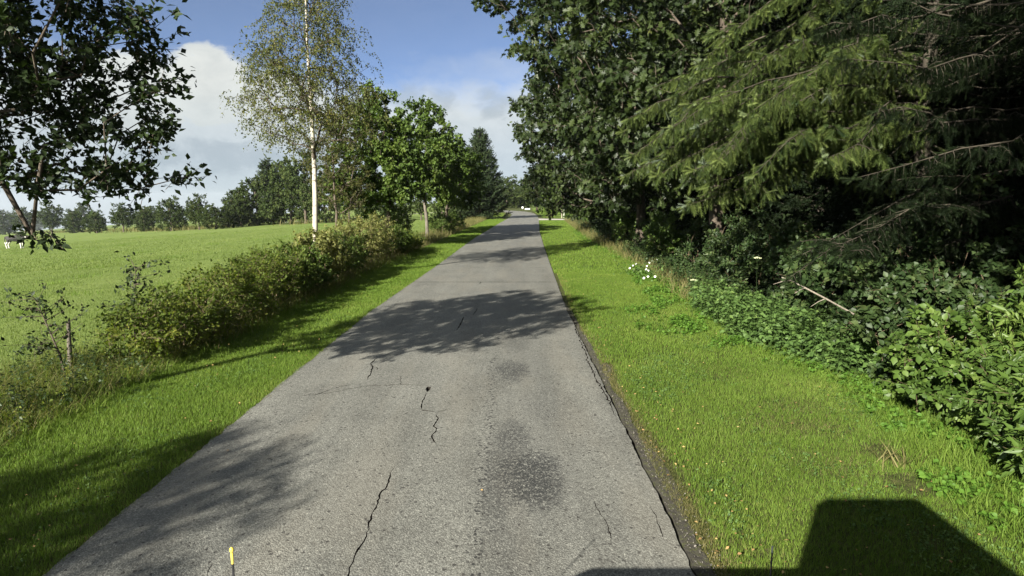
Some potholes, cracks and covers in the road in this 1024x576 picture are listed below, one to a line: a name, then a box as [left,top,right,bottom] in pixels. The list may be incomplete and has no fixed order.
crack [315,358,447,446]
crack [569,314,690,566]
crack [347,466,395,576]
